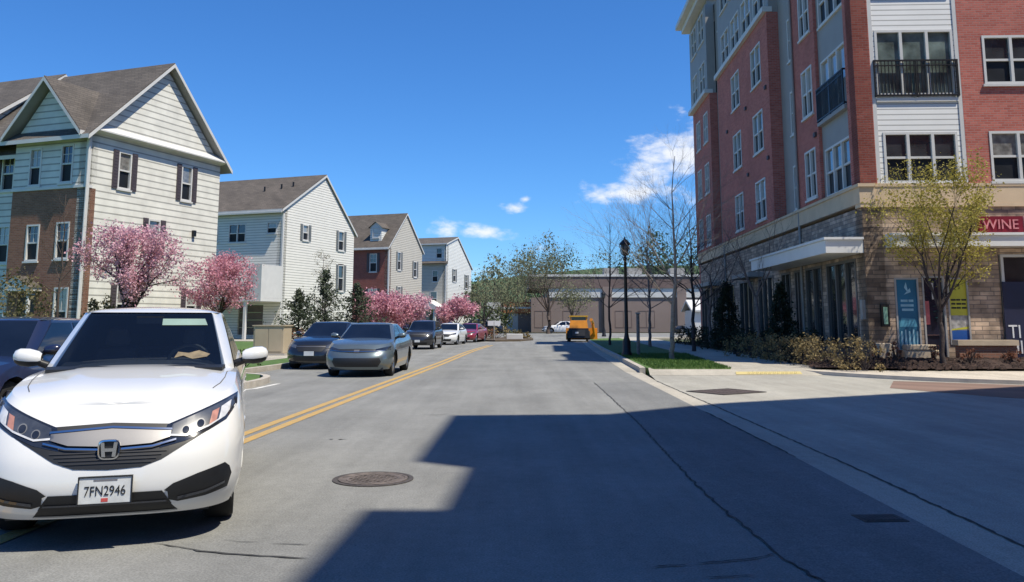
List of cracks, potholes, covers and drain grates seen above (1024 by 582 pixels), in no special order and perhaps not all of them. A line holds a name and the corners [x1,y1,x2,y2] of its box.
crack [158,539,302,558]
manhole cover [851,514,910,522]
crack [595,383,826,582]
manhole cover [332,471,414,487]
